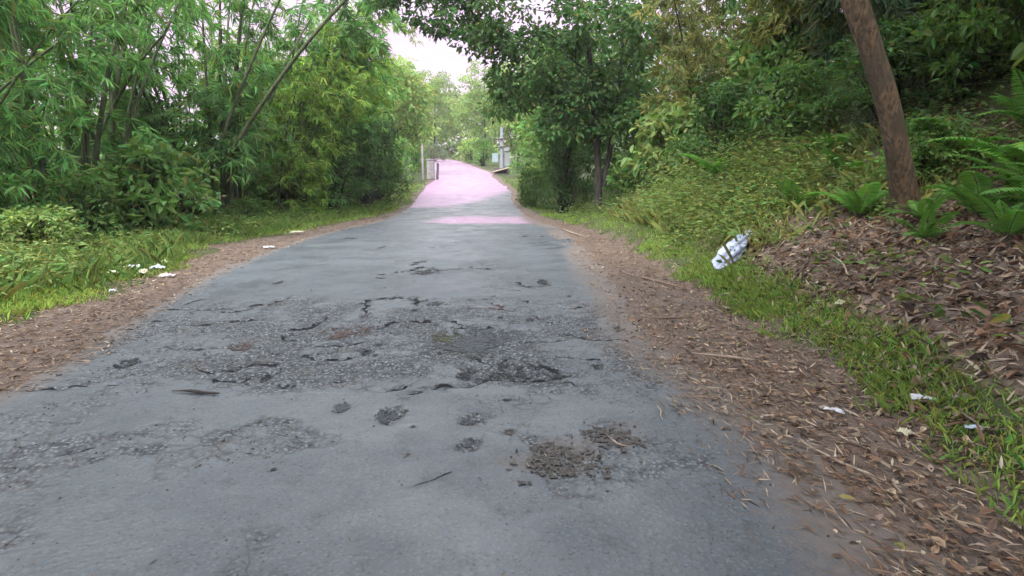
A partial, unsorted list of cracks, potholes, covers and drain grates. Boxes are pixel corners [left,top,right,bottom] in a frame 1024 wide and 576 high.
pothole [508,434,612,485]
pothole [455,368,477,381]
crack [174,297,431,383]
pothole [468,362,572,383]
crack [395,247,489,273]
crack [388,282,629,395]
crack [152,298,288,326]
pothole [369,406,408,425]
